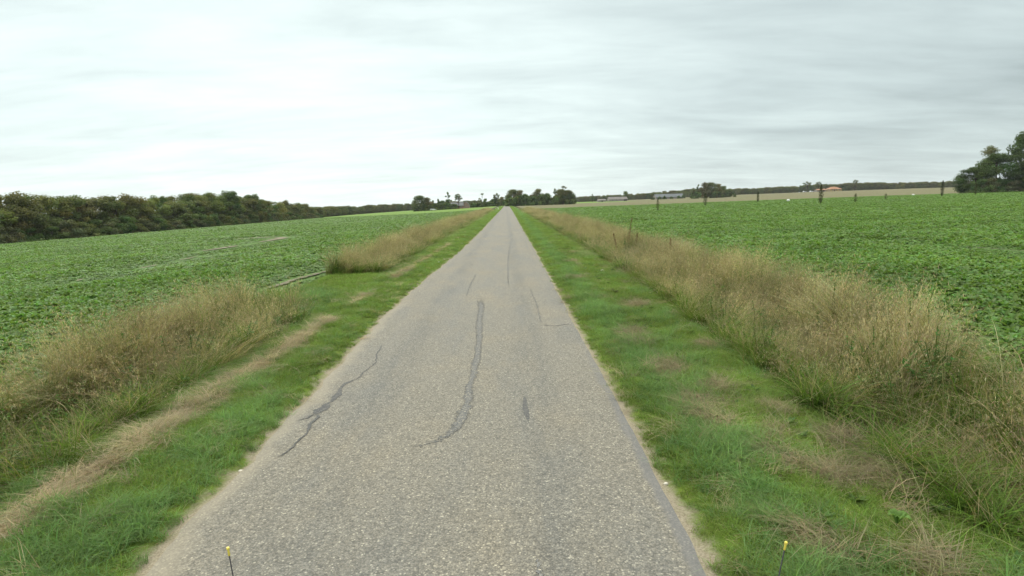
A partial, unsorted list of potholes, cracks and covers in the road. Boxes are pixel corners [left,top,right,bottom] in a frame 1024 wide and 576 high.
crack [507,237,528,286]
